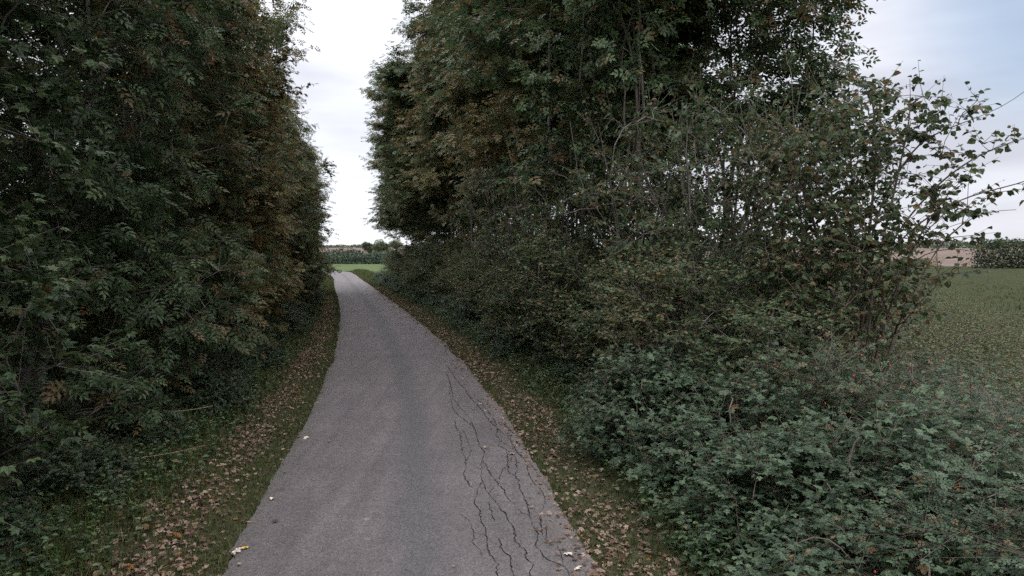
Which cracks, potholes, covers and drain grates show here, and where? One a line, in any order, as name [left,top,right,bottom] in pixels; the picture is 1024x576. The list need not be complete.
crack [446,365,570,576]
